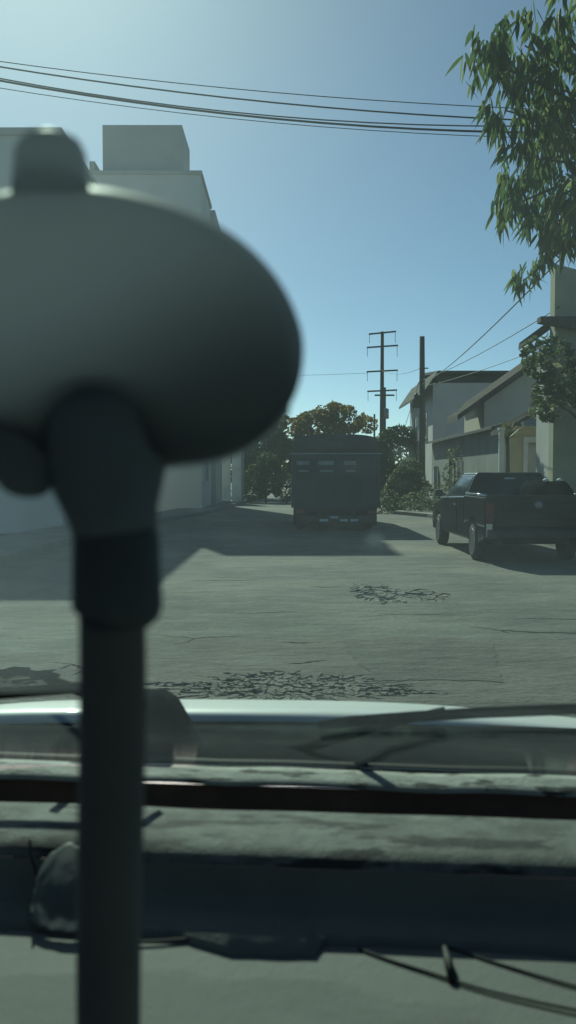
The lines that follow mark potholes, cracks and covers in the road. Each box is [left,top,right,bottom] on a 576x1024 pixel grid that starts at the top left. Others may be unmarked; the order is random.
crack [385,589,576,634]
